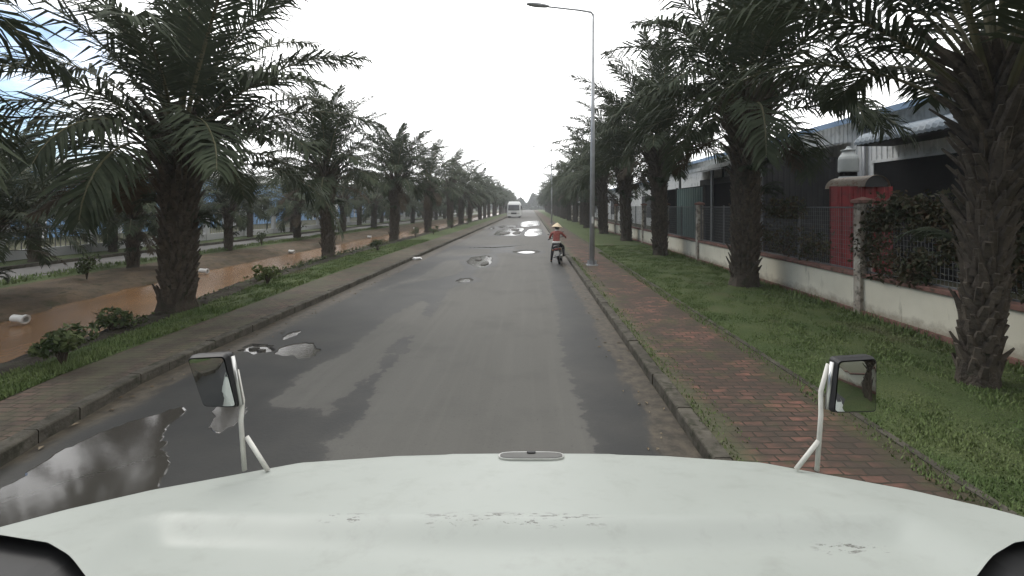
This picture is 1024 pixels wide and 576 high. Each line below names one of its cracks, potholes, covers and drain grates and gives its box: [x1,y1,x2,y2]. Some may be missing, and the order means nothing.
pothole [524,228,544,236]
pothole [237,344,276,354]
pothole [493,228,524,236]
pothole [466,255,493,267]
pothole [274,342,321,359]
